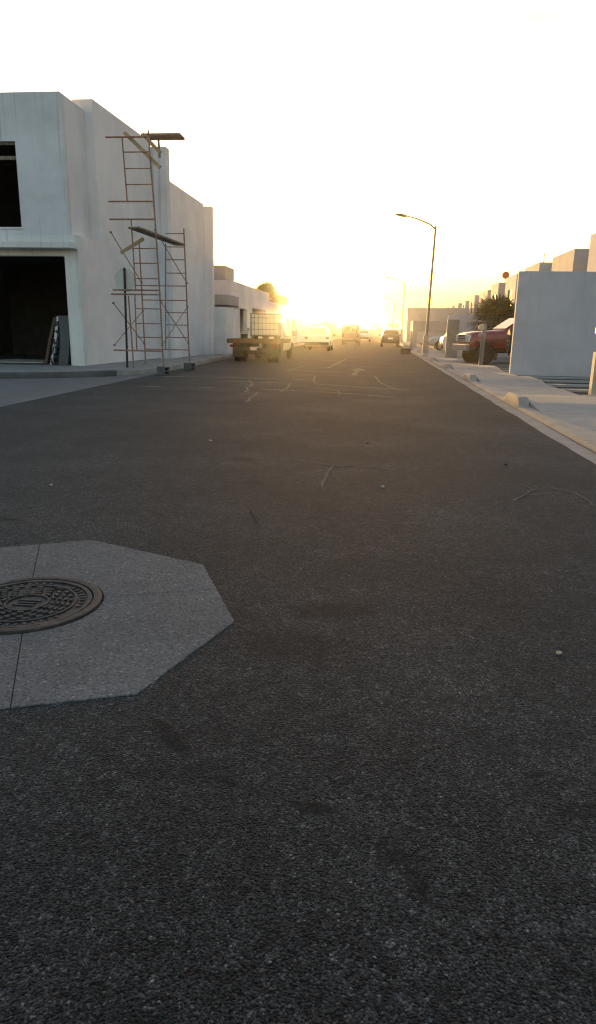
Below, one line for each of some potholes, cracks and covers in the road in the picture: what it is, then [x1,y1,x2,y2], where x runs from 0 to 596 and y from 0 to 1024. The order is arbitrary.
manhole cover [0,576,102,635]
crack [280,457,410,488]
crack [511,484,595,507]
